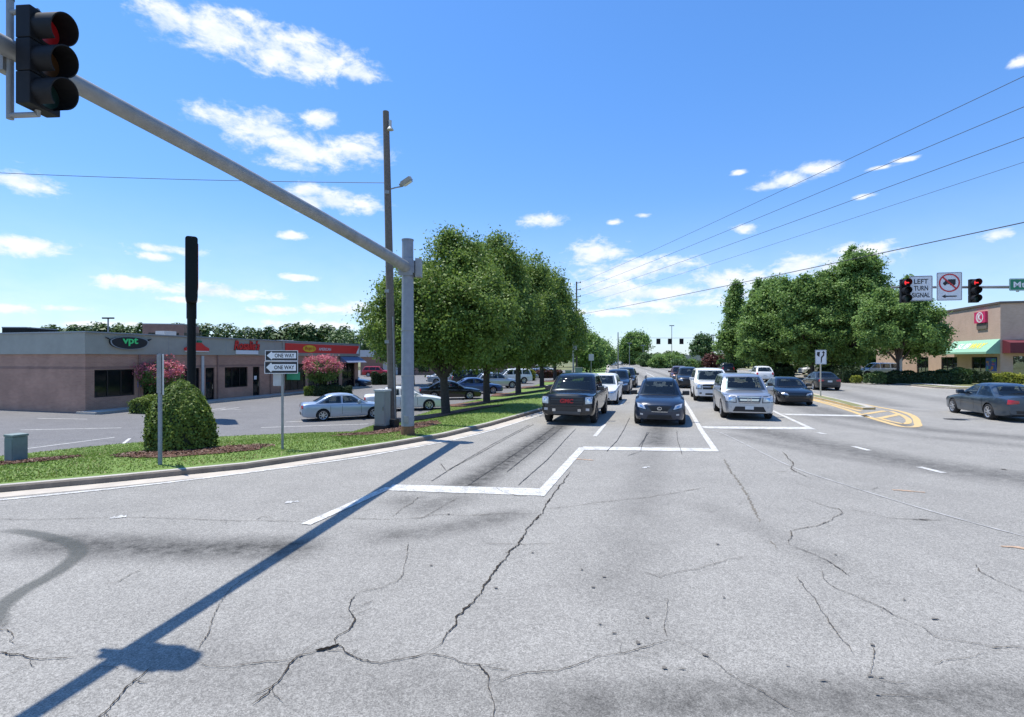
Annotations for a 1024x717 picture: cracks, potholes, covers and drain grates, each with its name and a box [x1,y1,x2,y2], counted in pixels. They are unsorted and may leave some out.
crack [196,475,798,717]
crack [90,666,149,717]
crack [770,500,1024,663]
crack [0,625,77,678]
